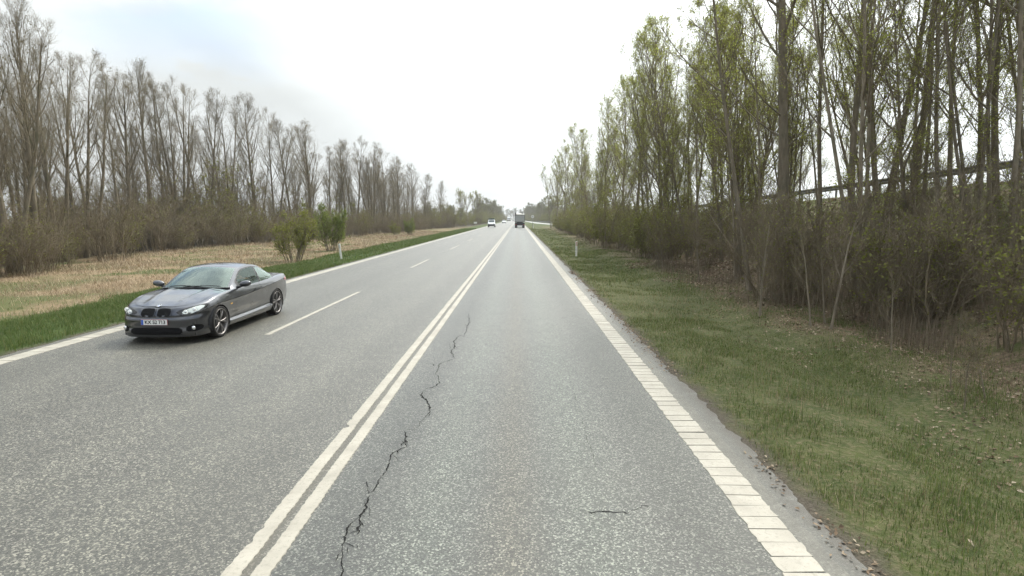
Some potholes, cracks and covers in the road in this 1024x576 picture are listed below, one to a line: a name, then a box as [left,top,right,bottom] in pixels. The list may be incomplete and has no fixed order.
crack [335,314,470,576]
